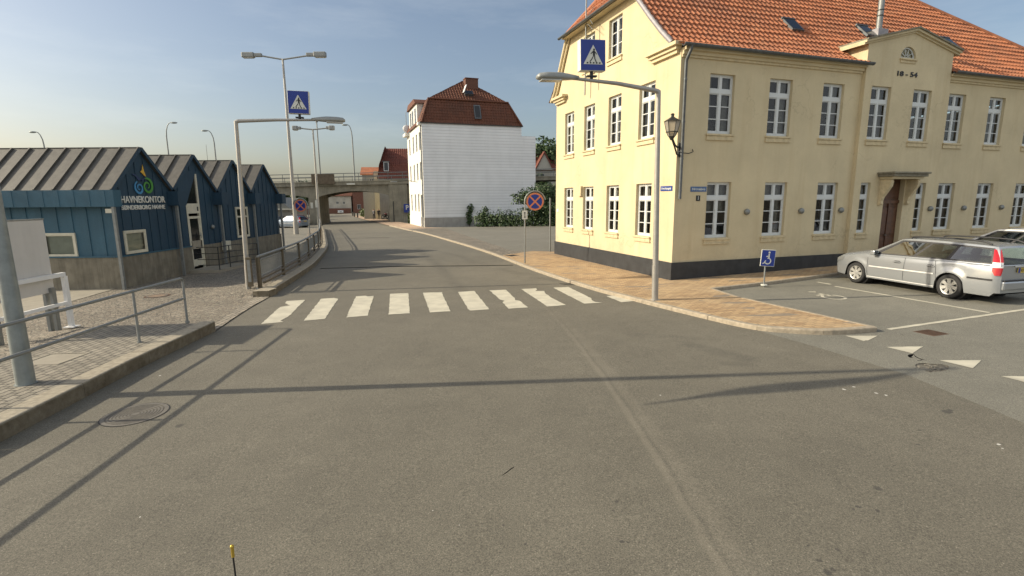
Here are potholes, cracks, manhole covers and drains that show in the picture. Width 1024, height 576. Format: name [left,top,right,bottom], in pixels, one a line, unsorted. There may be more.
manhole cover [98,403,170,427]
